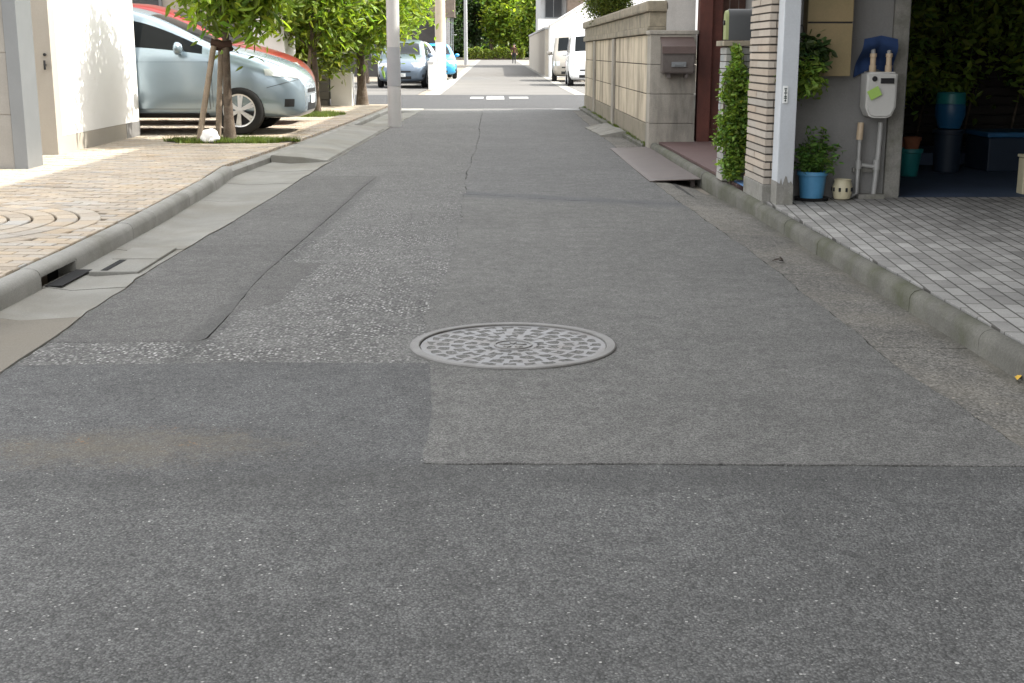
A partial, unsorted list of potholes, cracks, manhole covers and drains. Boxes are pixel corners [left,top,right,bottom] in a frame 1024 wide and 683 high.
drain grate [41,248,176,289]
manhole cover [410,322,616,370]
